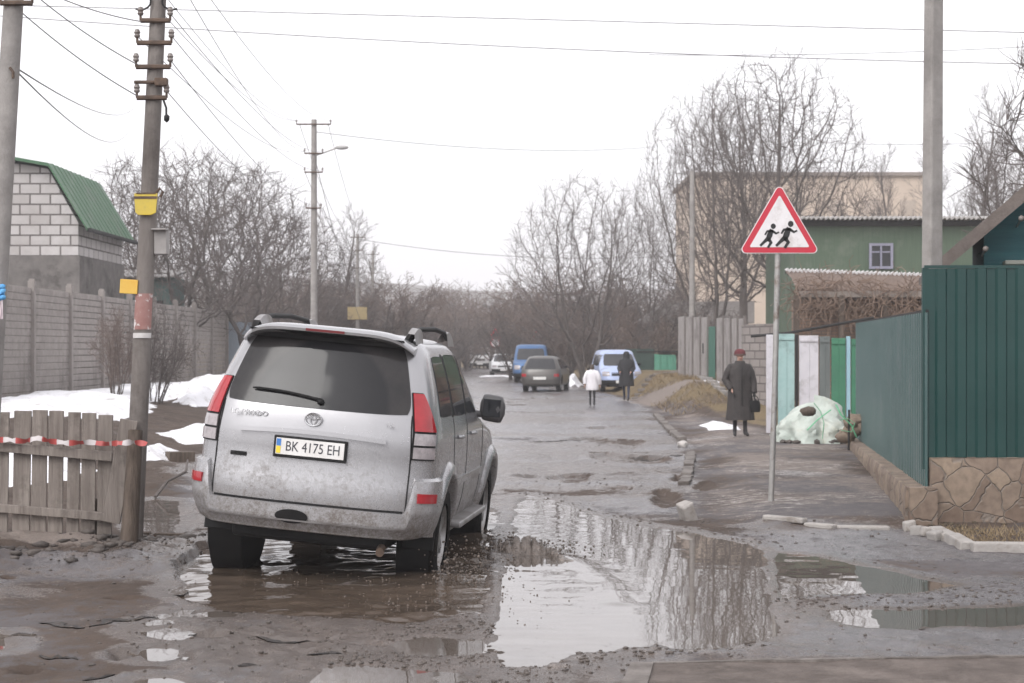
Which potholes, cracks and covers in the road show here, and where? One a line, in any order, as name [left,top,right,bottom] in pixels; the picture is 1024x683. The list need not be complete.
pothole [126,644,188,661]
pothole [824,603,1024,630]
pothole [160,608,197,618]
pothole [487,493,787,667]
crack [11,615,157,636]
pothole [132,624,196,640]
crack [255,636,341,655]
pothole [645,487,691,508]
pothole [586,451,681,466]
